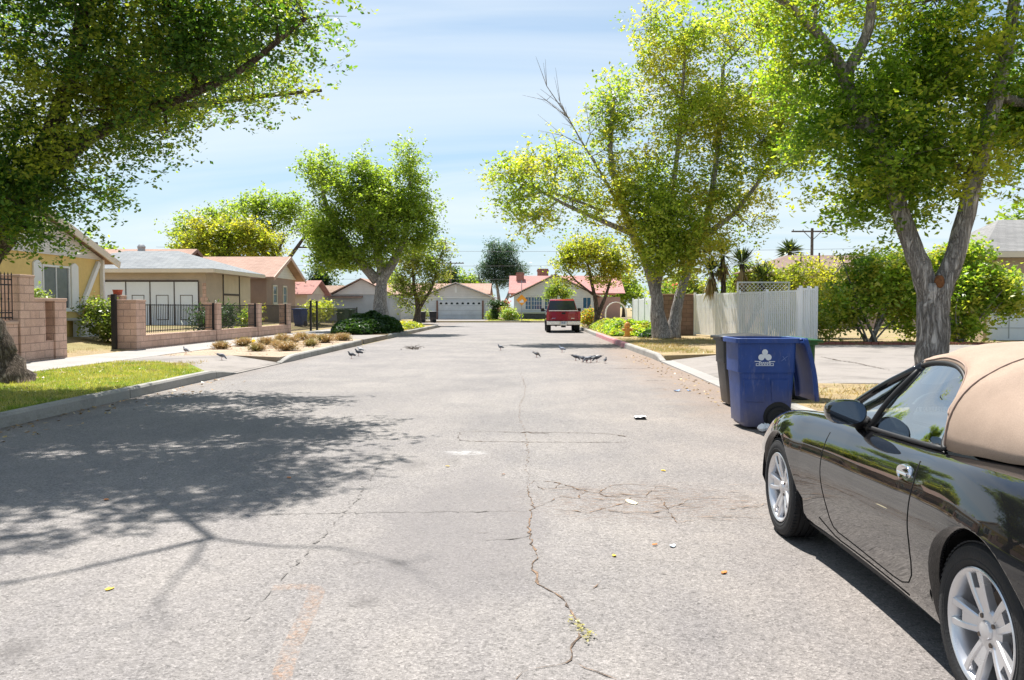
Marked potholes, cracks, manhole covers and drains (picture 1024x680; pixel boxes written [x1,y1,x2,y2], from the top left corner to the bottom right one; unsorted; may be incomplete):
crack [266,365,625,679]
crack [529,482,767,522]
